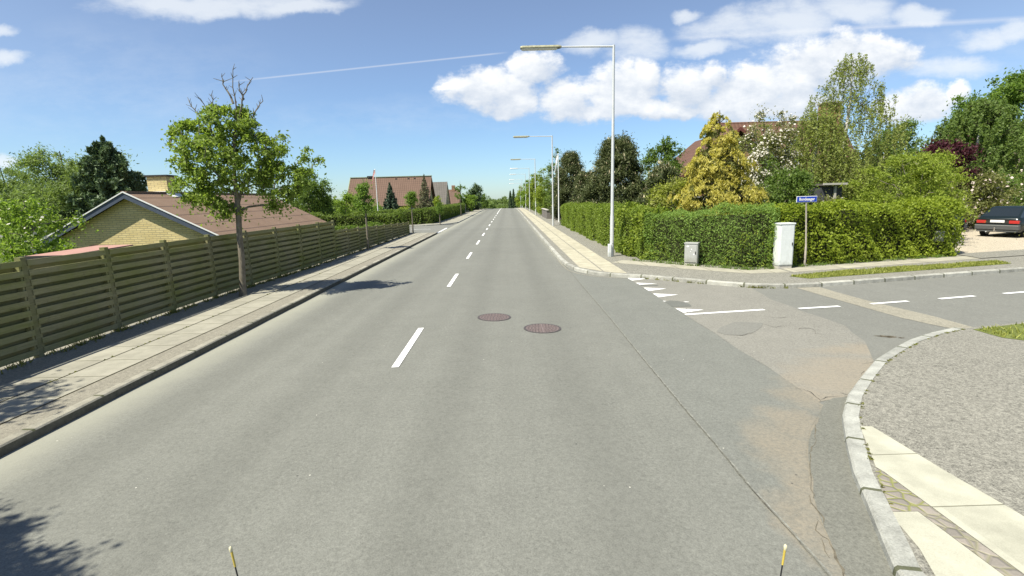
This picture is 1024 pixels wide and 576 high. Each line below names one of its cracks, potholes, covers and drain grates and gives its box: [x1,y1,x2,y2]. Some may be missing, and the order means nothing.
crack [809,424,845,576]
manhole cover [524,323,561,333]
manhole cover [478,313,511,321]
